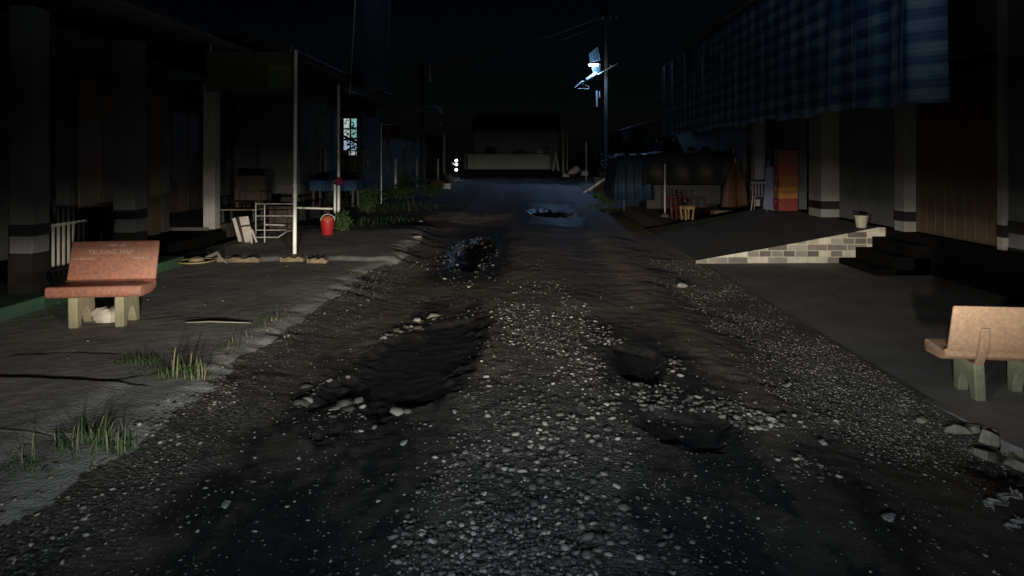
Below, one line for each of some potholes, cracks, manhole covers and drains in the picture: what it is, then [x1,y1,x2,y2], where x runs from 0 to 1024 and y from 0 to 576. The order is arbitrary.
pothole [605,344,672,388]
pothole [303,311,496,452]
crack [34,371,168,386]
pothole [633,406,733,454]
pothole [527,208,574,218]
pothole [438,236,496,273]
